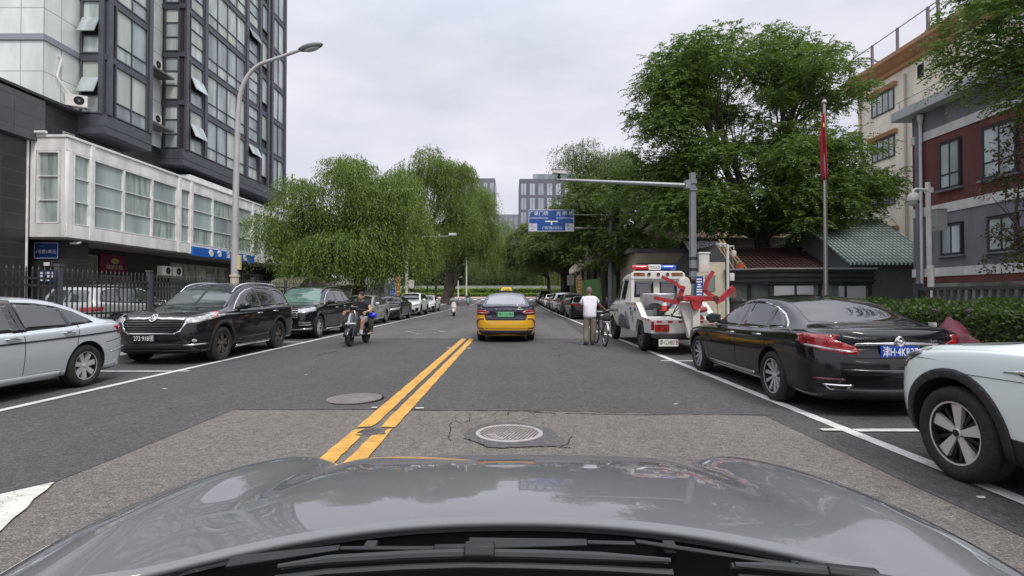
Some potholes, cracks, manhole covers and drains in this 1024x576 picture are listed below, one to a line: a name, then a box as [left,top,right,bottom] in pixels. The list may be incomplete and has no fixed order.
crack [447,412,581,448]
manhole cover [326,393,384,405]
manhole cover [476,424,543,442]
